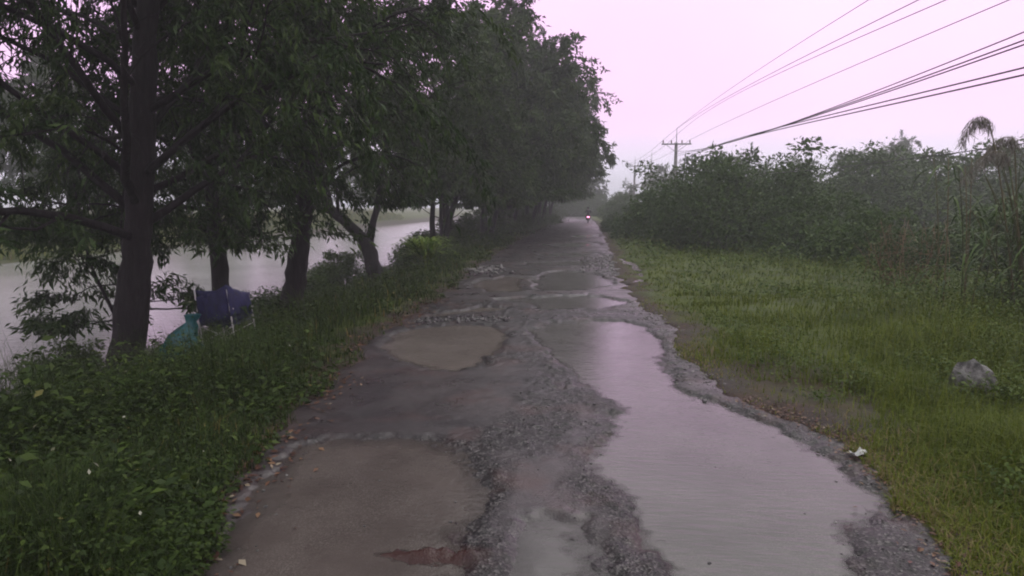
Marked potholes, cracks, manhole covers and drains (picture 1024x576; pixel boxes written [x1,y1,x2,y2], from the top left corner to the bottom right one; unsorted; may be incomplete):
pothole [513,316,933,576]
pothole [487,292,640,312]
pothole [461,496,614,576]
pothole [460,275,533,293]
pothole [529,269,621,292]
pothole [359,320,519,376]
